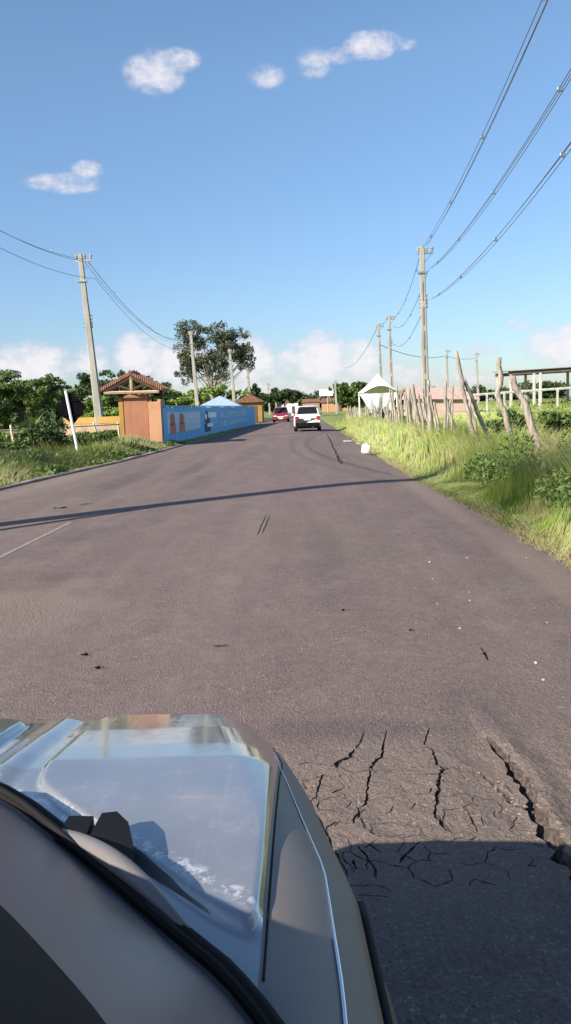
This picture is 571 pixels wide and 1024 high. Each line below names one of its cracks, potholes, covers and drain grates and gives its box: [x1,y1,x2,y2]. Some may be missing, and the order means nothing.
crack [293,725,571,898]
